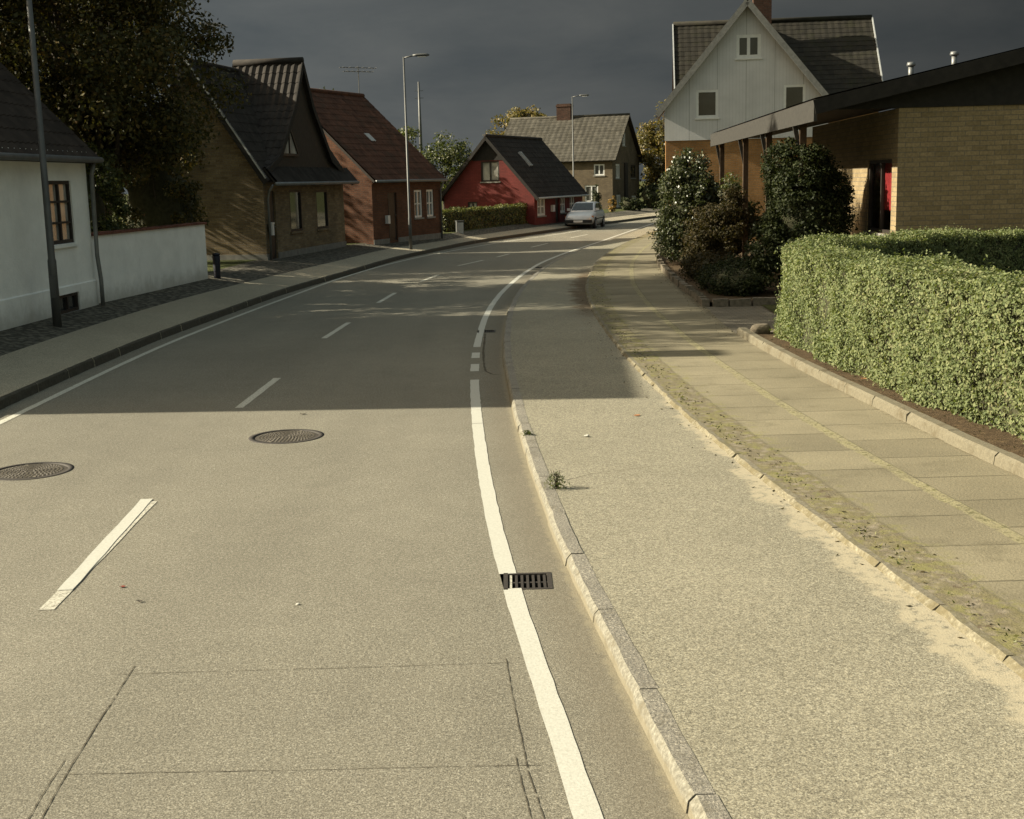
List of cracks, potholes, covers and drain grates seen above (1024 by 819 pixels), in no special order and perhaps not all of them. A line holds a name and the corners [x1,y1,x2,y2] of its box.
manhole cover [248,429,324,444]
drain grate [503,572,553,590]
manhole cover [0,462,74,481]
